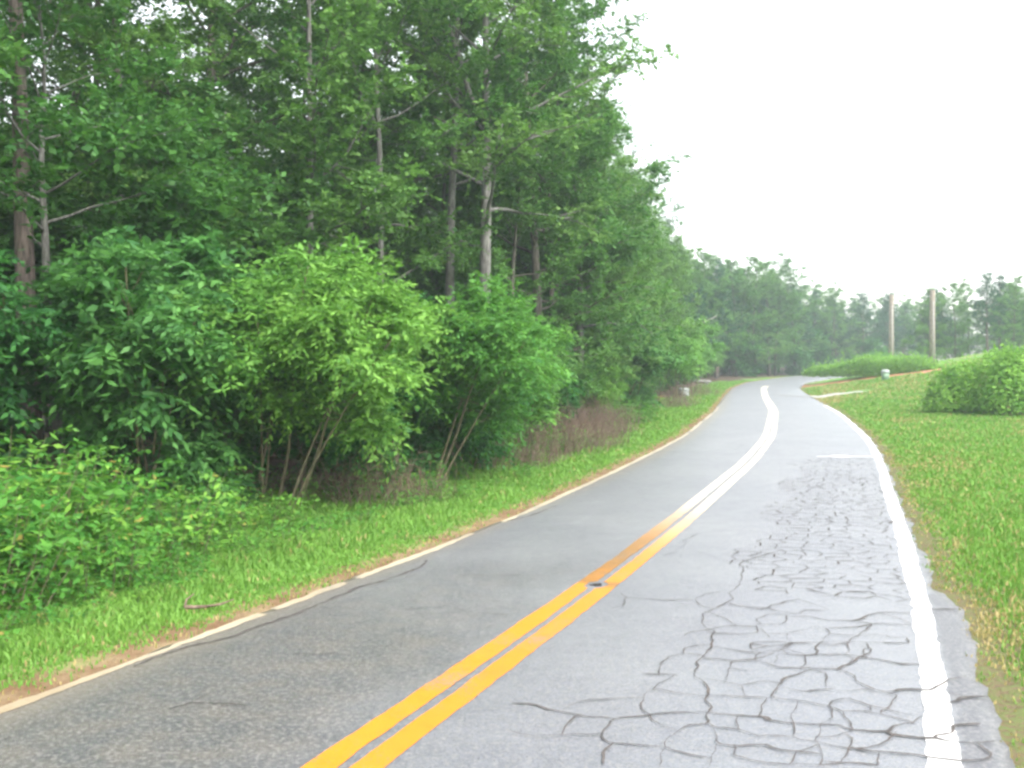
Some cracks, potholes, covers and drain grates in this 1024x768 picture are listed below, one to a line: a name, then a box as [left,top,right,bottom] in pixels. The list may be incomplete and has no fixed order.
crack [170,696,248,709]
crack [133,560,427,667]
crack [513,458,993,765]
